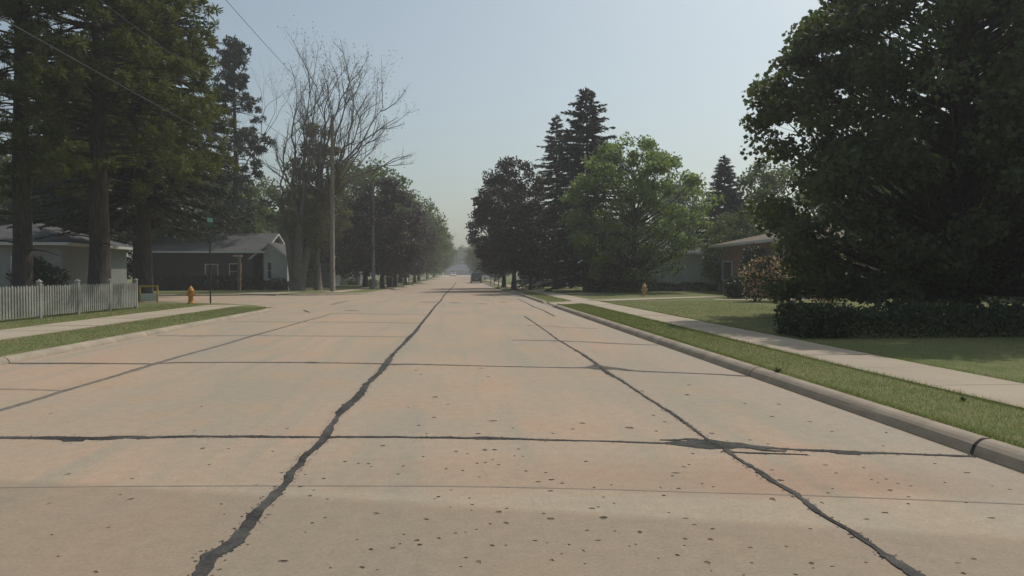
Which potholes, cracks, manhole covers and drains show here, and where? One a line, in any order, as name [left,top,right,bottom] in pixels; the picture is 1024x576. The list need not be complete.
crack [524,325,649,345]
crack [156,301,427,337]
